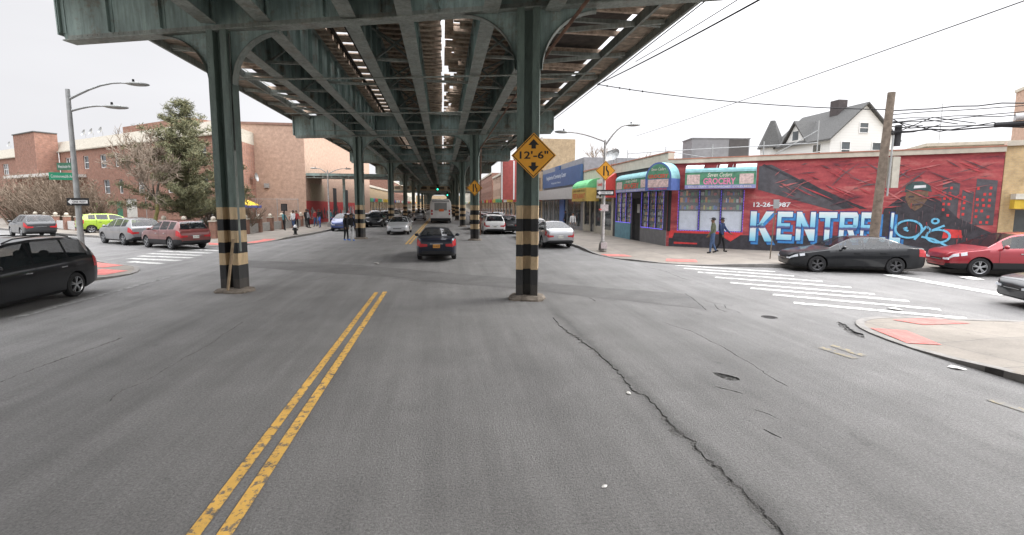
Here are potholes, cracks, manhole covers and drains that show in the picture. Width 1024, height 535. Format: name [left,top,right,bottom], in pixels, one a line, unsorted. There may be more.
crack [109,323,241,402]
crack [553,318,787,535]
pothole [836,322,864,338]
pothole [712,372,740,381]
crack [0,337,123,382]
